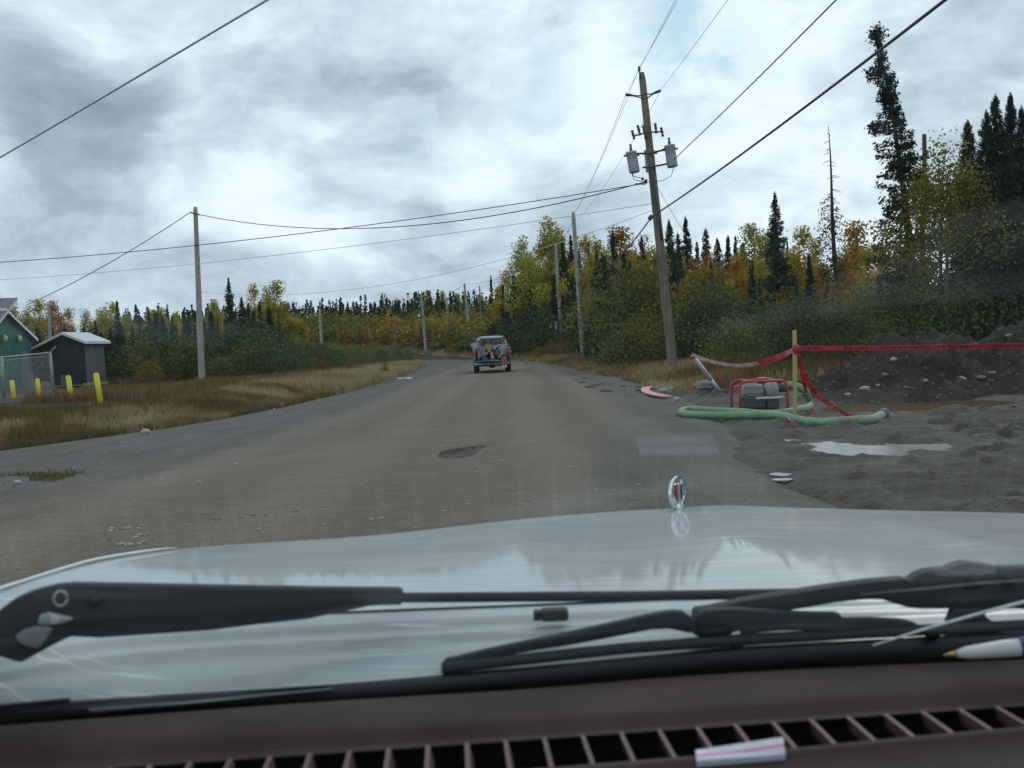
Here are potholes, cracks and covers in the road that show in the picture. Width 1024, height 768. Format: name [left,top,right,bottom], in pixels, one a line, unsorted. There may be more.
pothole [438,445,486,459]
